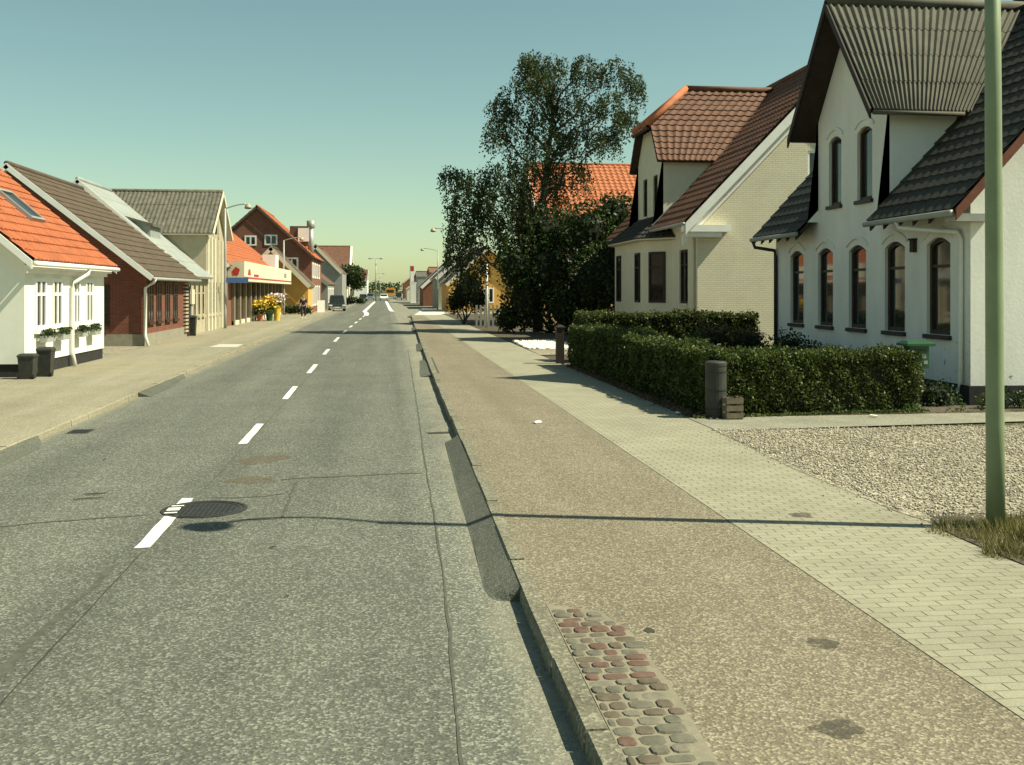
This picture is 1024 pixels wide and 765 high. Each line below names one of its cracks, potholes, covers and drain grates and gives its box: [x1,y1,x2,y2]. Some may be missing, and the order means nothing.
manhole cover [161,500,248,518]
